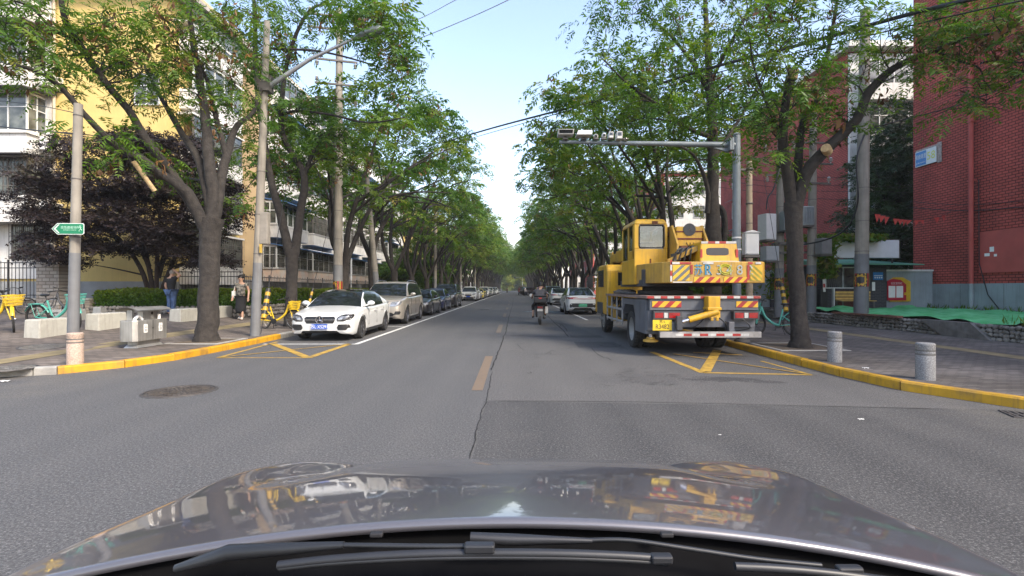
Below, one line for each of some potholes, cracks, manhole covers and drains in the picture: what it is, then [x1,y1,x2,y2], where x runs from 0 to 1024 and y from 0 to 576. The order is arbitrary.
manhole cover [139,384,219,399]
drain grate [998,410,1024,418]
crack [469,298,570,459]
